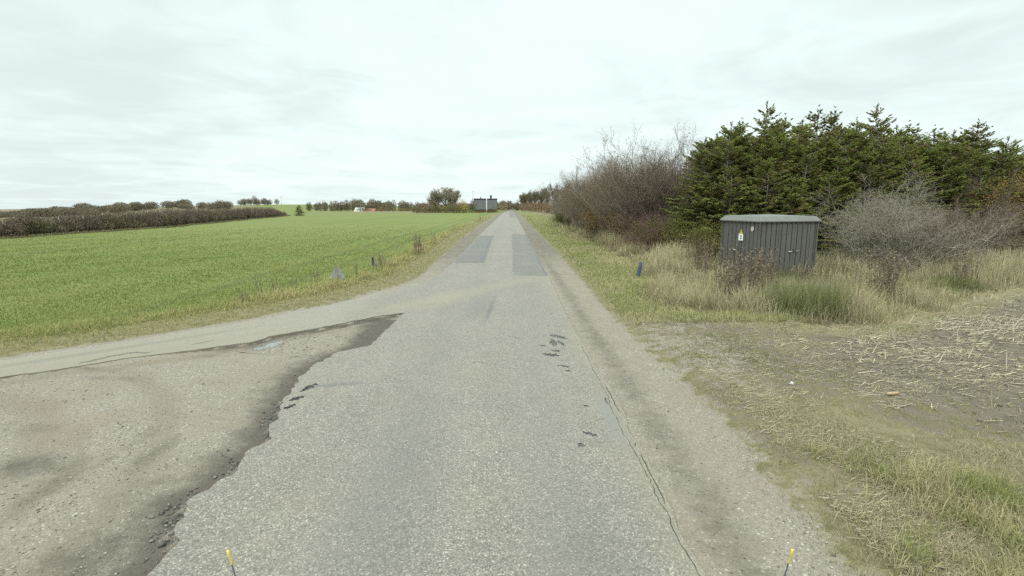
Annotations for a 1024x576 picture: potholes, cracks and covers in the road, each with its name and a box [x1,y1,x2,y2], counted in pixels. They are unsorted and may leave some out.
crack [582,347,700,576]
